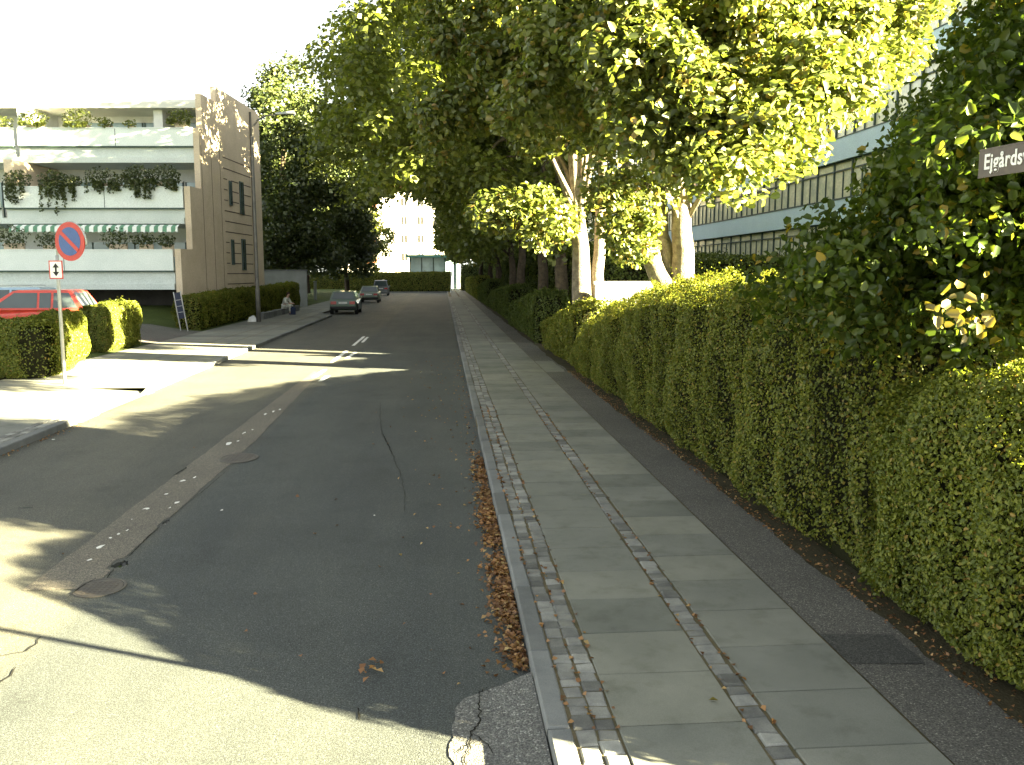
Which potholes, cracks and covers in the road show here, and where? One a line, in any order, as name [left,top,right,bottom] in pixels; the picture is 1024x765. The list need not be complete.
crack [456,687,493,765]
crack [0,636,41,682]
crack [379,403,406,511]
manhole cover [219,453,259,463]
manhole cover [72,578,127,598]
